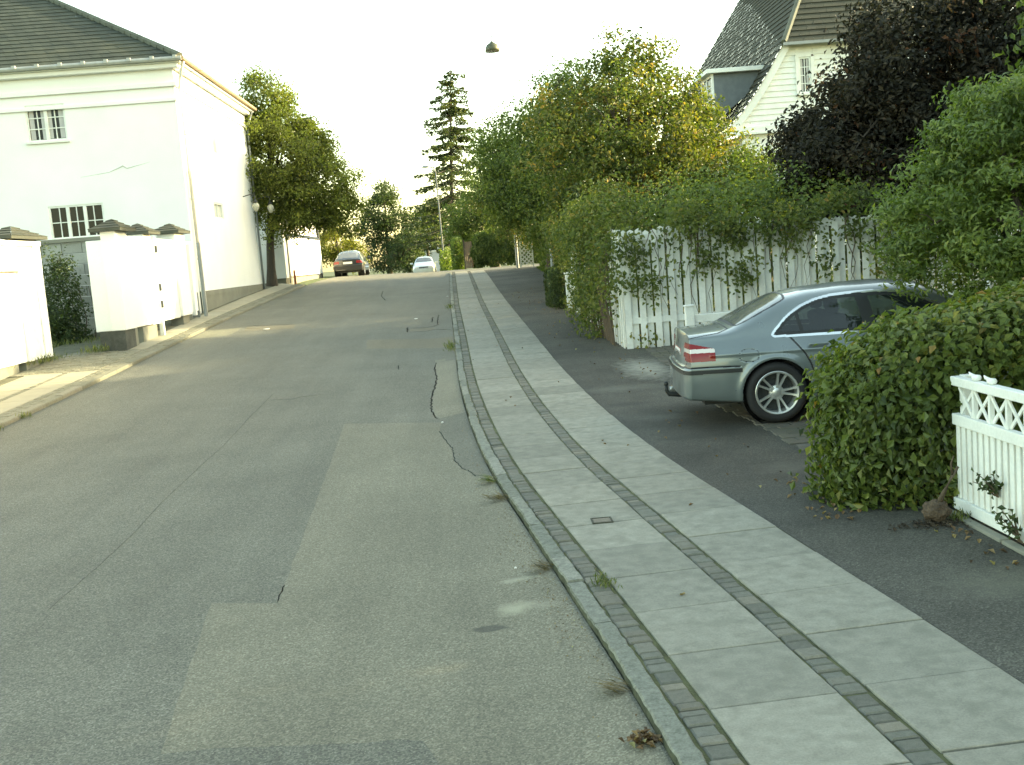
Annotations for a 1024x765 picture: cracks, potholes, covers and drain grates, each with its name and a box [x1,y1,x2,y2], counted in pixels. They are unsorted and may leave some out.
manhole cover [590,516,614,525]
crack [430,363,492,479]
